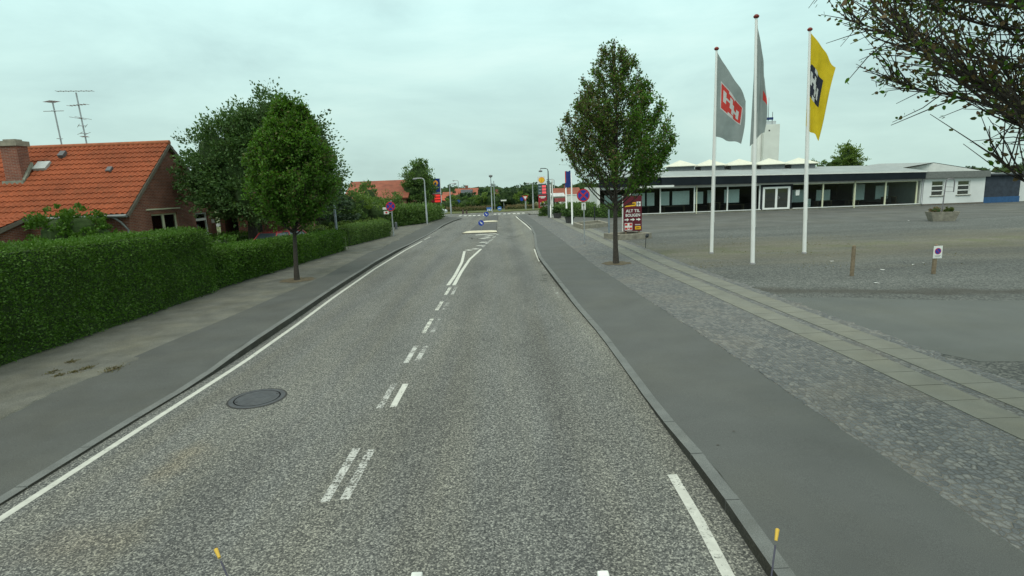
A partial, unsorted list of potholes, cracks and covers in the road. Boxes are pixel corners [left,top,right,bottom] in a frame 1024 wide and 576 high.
manhole cover [226,388,287,409]
